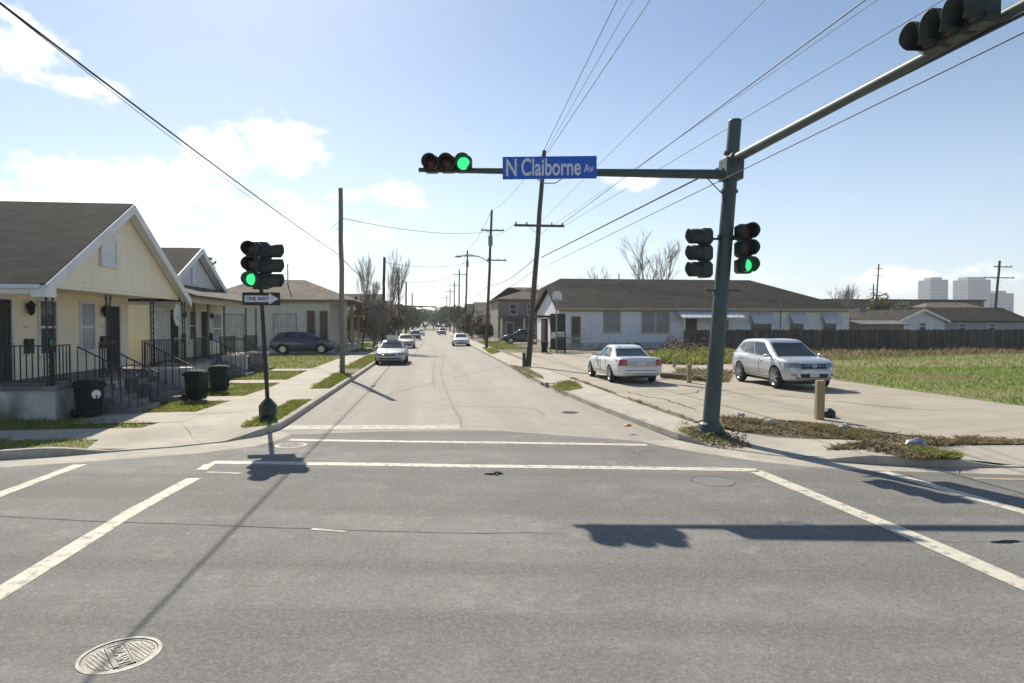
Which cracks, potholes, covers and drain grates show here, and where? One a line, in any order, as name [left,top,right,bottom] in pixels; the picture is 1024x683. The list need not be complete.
manhole cover [75,636,163,675]
manhole cover [690,476,736,486]
crack [428,351,546,455]
